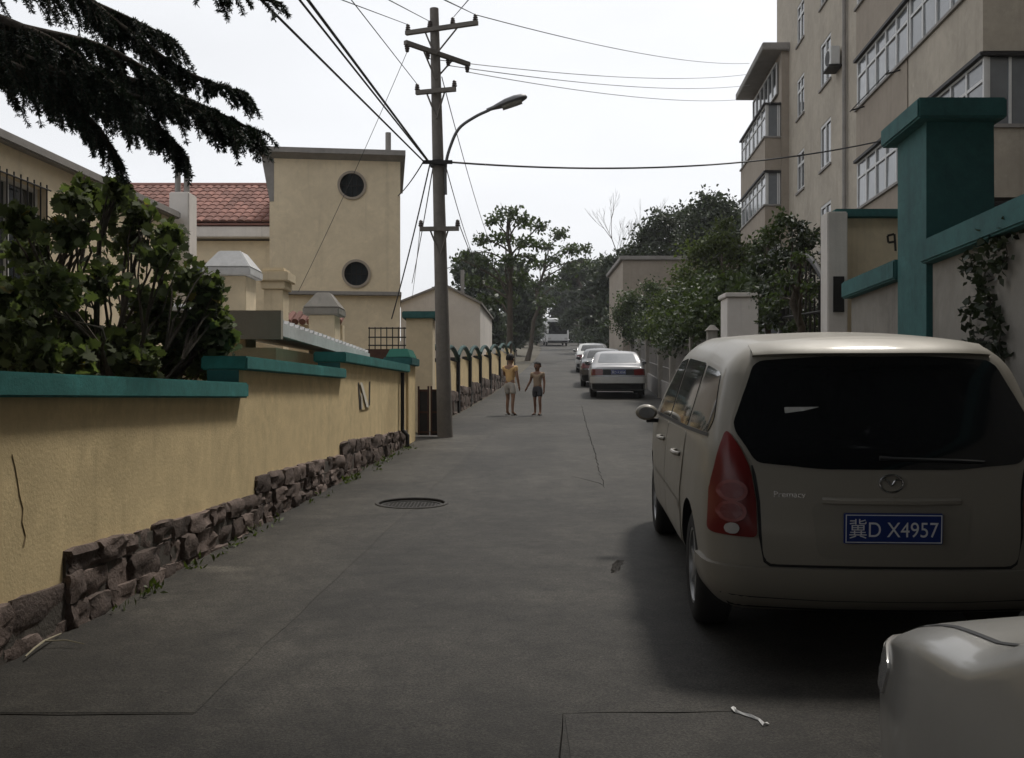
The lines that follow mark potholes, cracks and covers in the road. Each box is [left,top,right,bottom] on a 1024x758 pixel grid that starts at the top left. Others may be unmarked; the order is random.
crack [577,407,604,487]
manhole cover [375,497,448,509]
